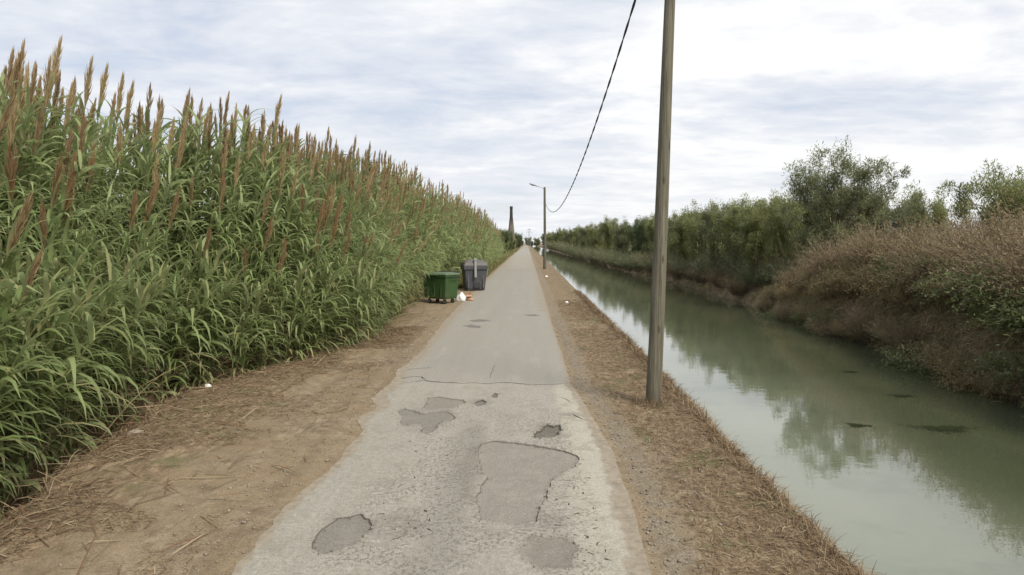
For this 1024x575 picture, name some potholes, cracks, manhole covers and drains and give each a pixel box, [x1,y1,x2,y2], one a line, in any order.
pothole [398,408,455,434]
pothole [423,397,466,409]
pothole [532,424,562,439]
pothole [476,441,580,523]
pothole [311,514,372,554]
crack [401,366,582,419]
